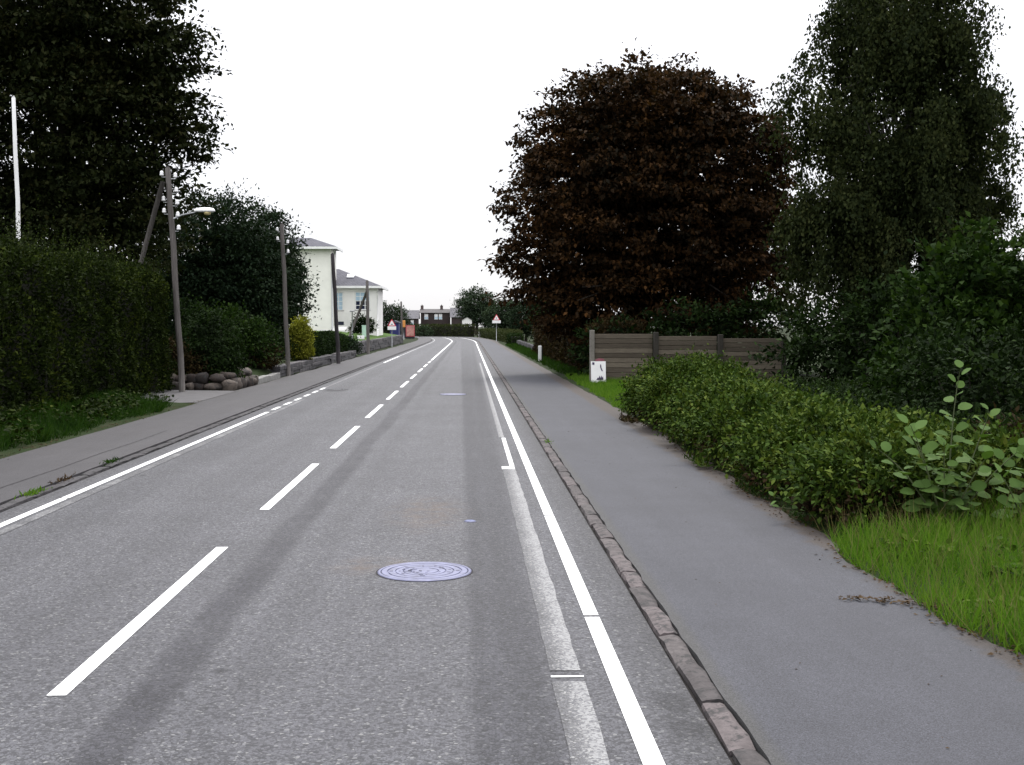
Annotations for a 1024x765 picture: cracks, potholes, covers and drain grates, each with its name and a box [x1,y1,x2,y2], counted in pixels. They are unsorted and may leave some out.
manhole cover [376,562,473,582]
